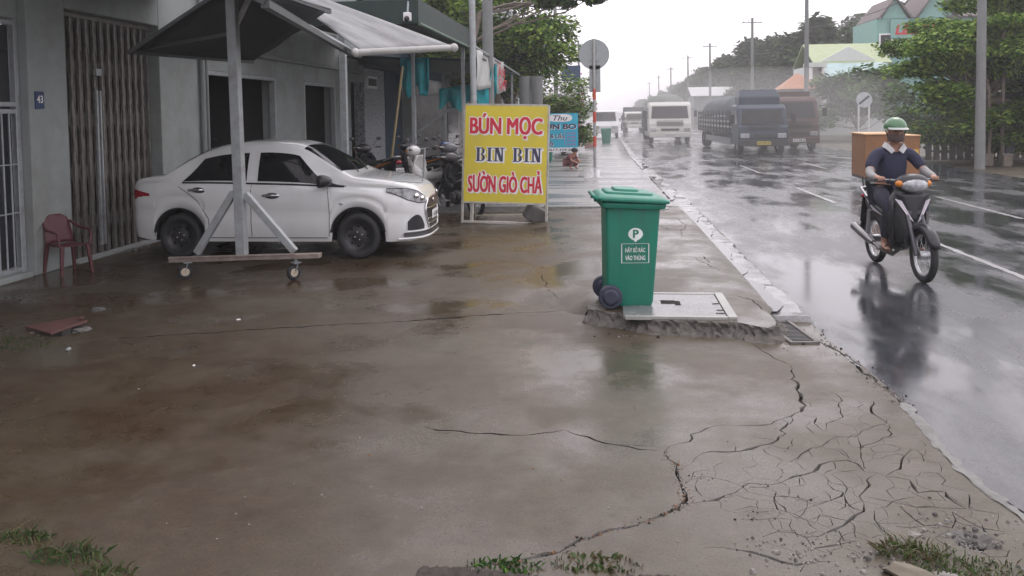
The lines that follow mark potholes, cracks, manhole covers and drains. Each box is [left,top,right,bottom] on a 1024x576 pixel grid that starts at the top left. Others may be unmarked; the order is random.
crack [470,344,1010,572]
crack [424,426,656,451]
manhole cover [622,292,738,320]
crack [126,311,551,338]
drain grate [781,320,820,344]
